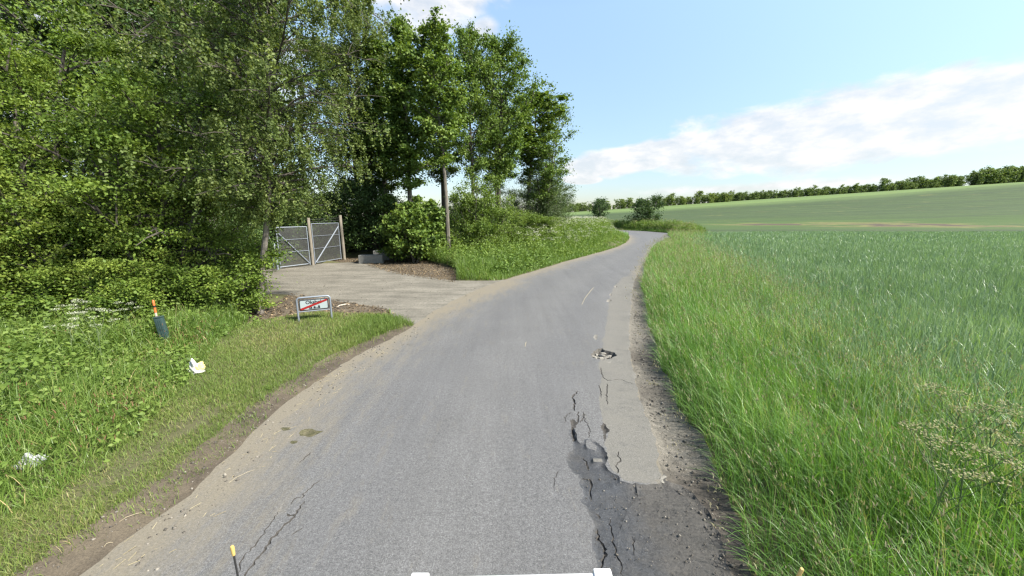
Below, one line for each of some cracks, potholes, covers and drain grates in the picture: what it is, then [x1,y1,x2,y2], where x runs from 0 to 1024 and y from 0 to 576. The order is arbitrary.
crack [599,367,632,404]
pothole [566,429,732,576]
crack [564,391,635,576]
crack [236,481,319,576]
pothole [591,348,617,359]
